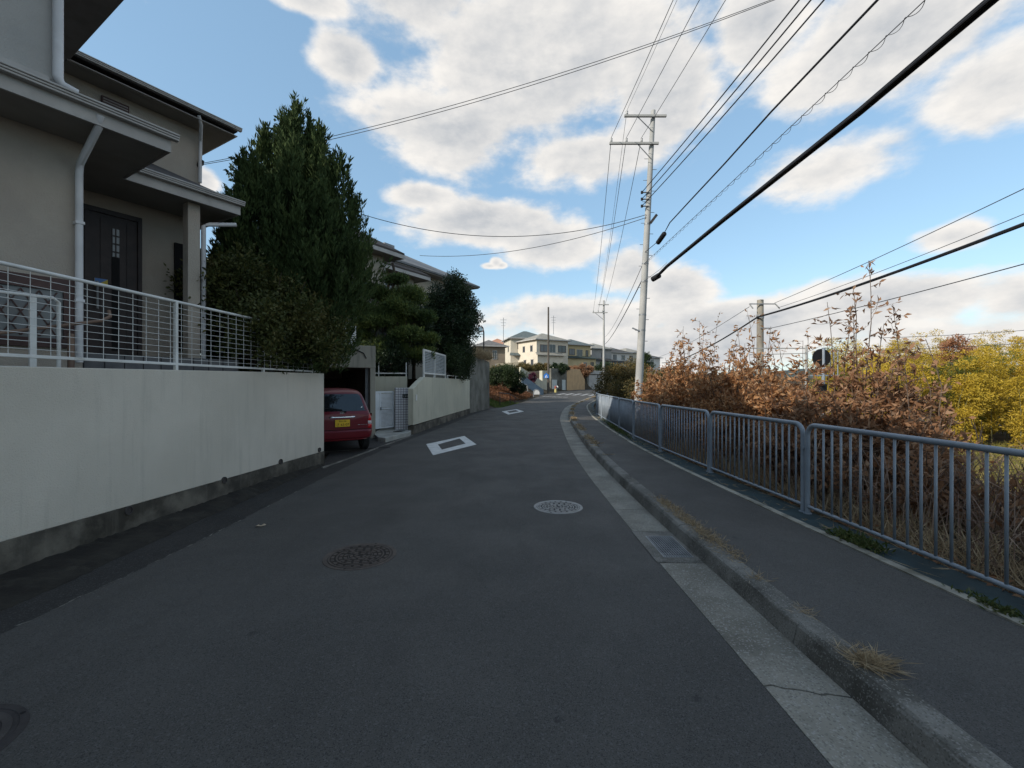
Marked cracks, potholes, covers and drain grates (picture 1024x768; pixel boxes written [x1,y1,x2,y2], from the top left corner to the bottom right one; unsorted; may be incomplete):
manhole cover [322,543,397,571]
manhole cover [0,704,30,751]
manhole cover [534,500,583,514]
drain grate [632,531,704,563]
